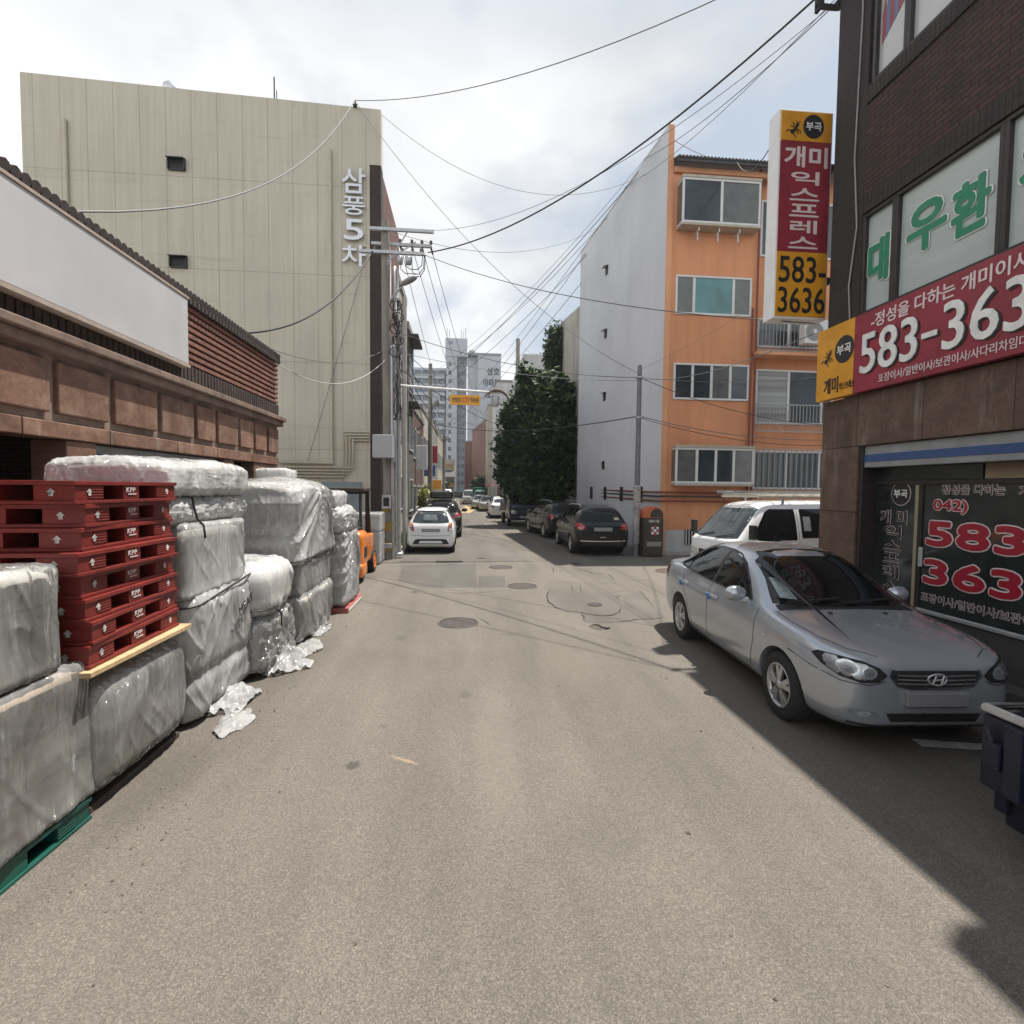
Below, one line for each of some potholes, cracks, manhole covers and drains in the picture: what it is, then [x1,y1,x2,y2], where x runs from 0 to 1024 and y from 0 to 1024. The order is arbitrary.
manhole cover [438,617,479,628]
crack [546,569,657,622]
